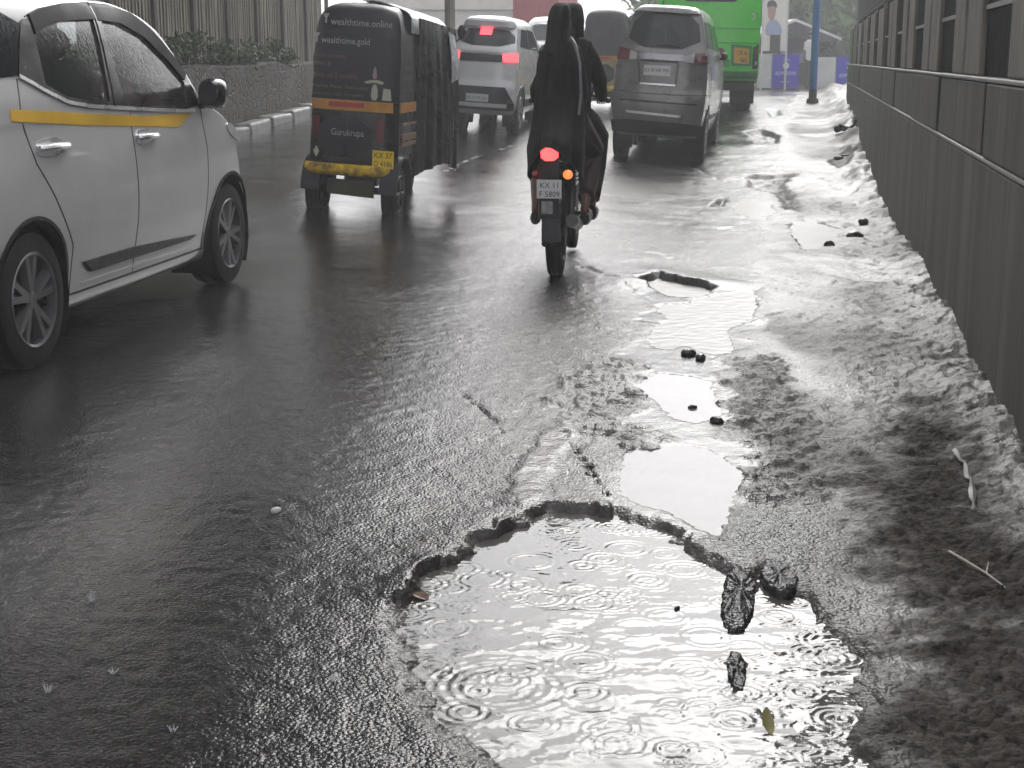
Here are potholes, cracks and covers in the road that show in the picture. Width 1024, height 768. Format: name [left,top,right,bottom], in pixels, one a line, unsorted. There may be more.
pothole [617,367,741,427]
pothole [620,267,738,299]
crack [447,389,513,434]
pothole [617,285,789,363]
pothole [350,492,944,768]
pothole [595,438,762,551]
